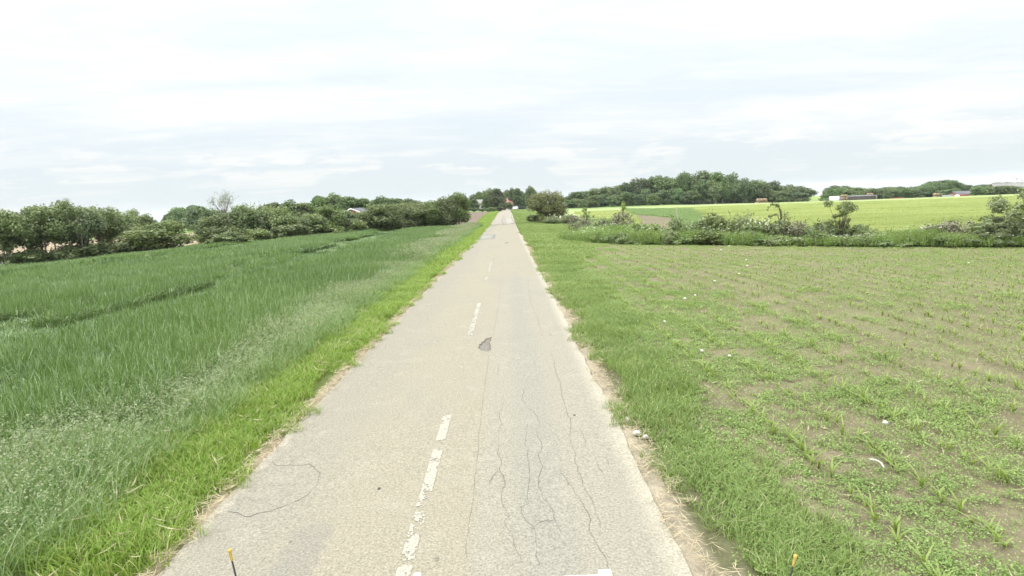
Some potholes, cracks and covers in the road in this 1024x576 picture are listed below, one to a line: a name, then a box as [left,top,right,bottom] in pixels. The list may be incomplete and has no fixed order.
crack [528,280,609,569]
crack [489,369,561,568]
pothole [478,337,492,352]
crack [230,457,321,517]
